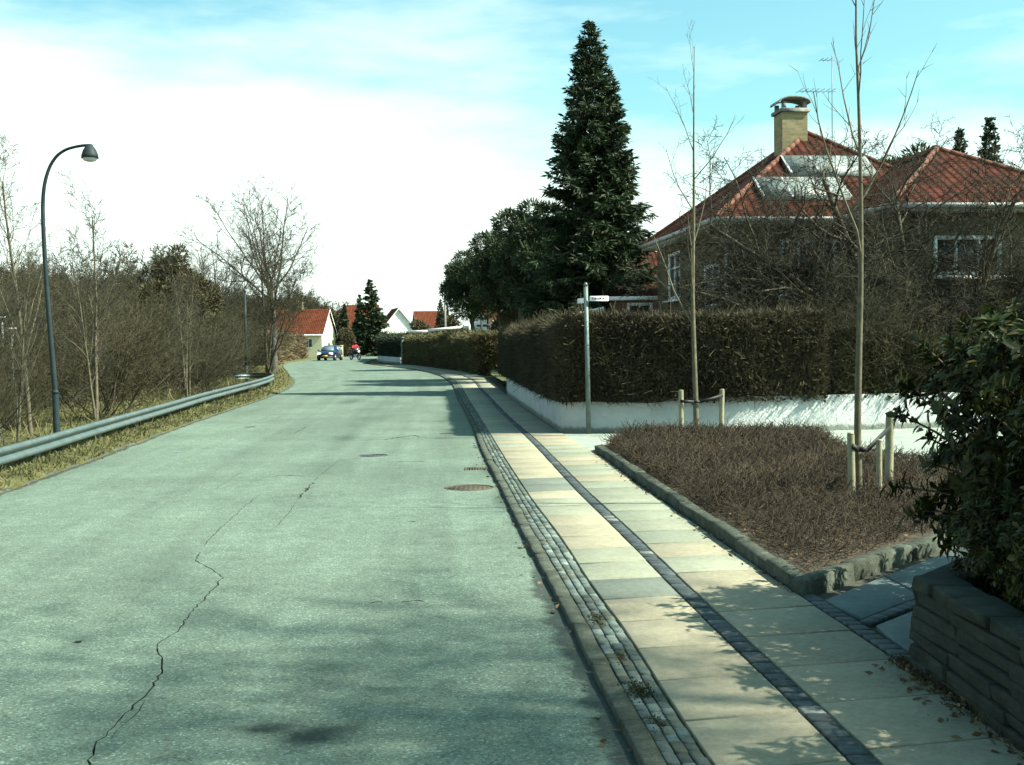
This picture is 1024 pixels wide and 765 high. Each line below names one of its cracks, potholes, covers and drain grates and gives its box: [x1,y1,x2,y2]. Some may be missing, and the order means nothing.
crack [263,460,339,528]
crack [87,496,258,765]
